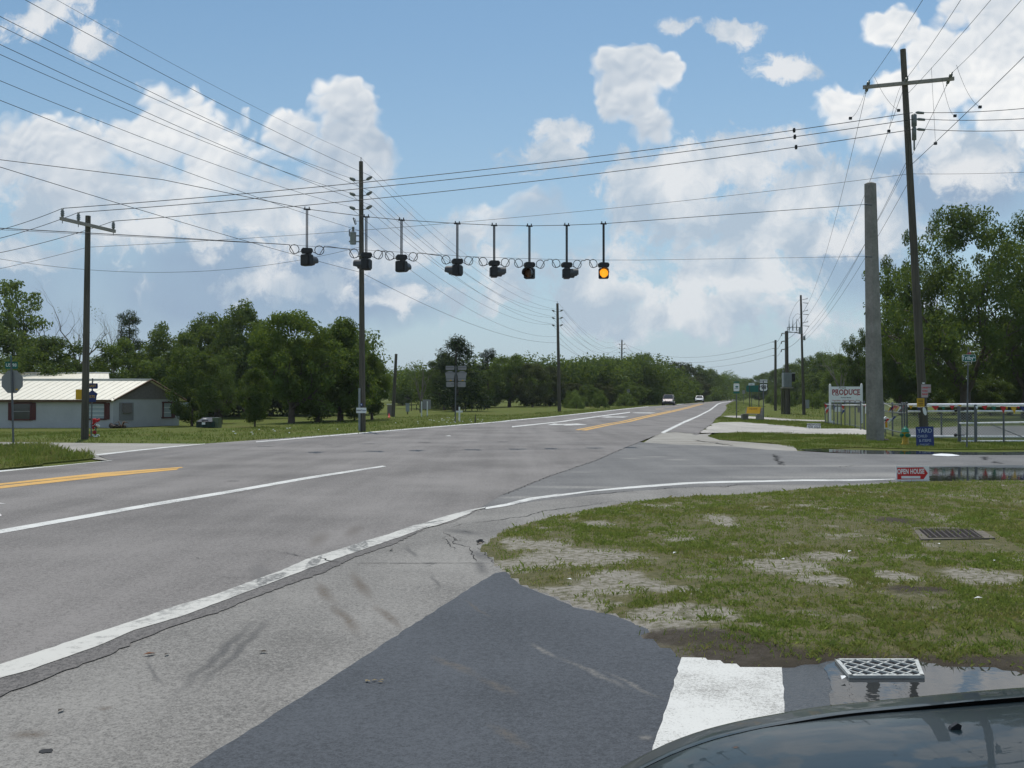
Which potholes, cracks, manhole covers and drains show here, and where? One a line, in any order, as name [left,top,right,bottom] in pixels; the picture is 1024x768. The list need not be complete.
drain grate [835,658,925,679]
drain grate [912,527,995,541]
crack [417,523,494,566]
